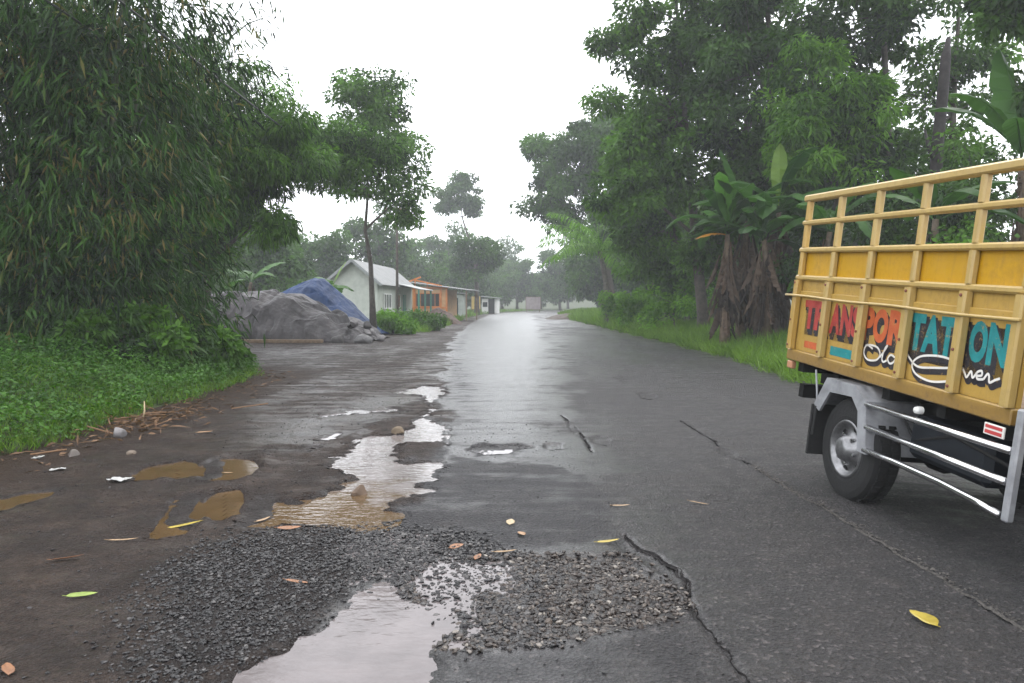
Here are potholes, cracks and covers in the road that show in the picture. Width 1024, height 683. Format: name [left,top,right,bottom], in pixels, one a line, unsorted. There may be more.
crack [680,420,750,464]
pothole [462,442,535,456]
crack [624,535,750,683]
pothole [232,384,455,534]
